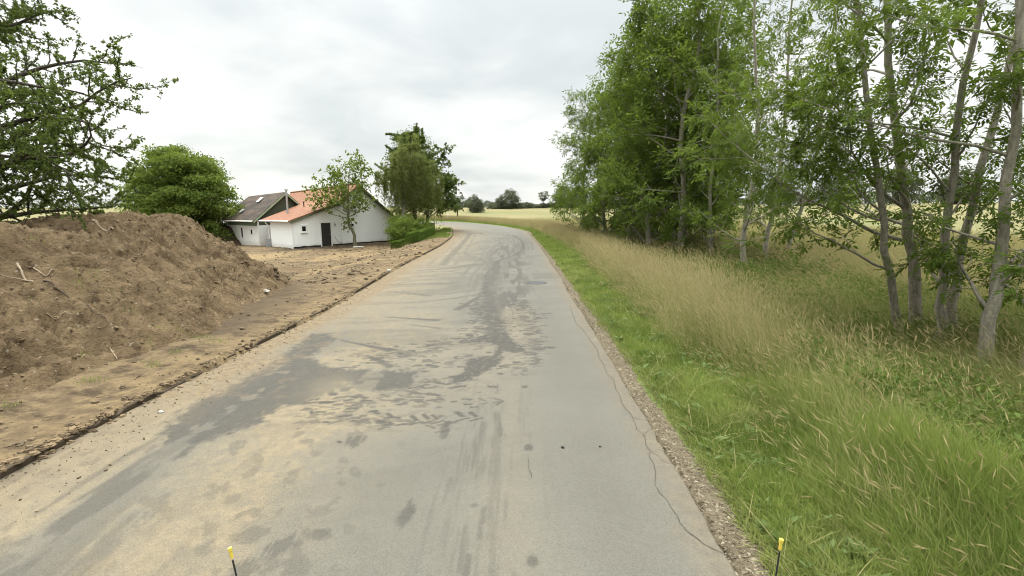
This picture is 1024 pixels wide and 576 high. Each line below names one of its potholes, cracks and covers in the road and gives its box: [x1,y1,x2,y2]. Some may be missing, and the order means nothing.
crack [572,312,725,554]
